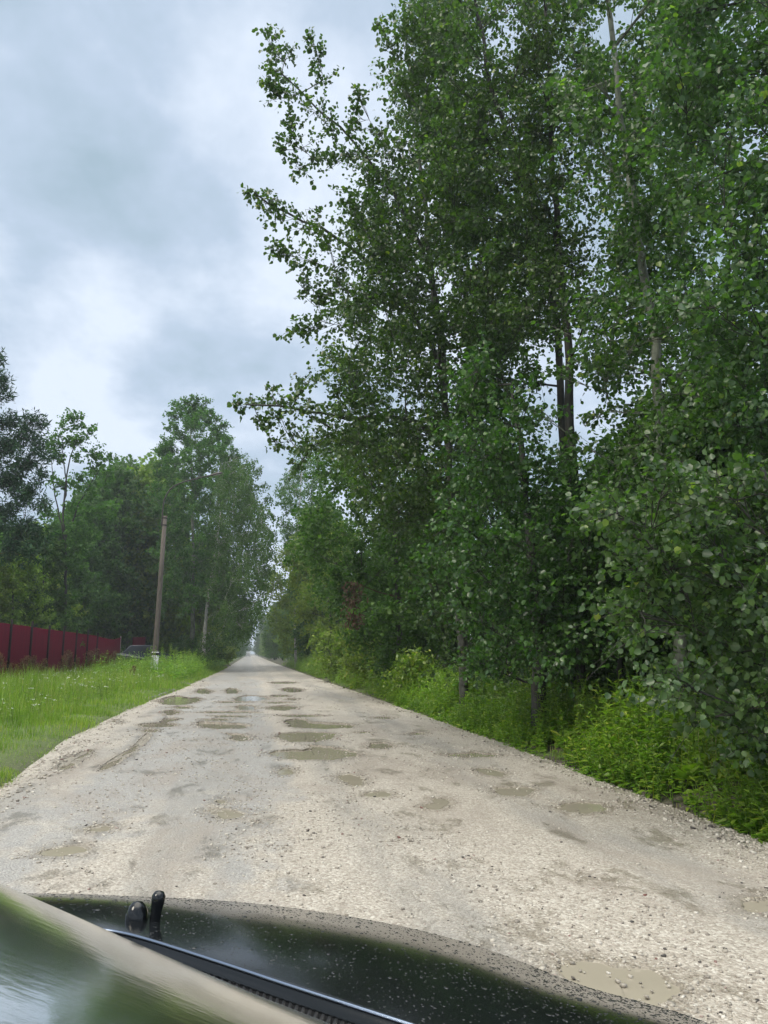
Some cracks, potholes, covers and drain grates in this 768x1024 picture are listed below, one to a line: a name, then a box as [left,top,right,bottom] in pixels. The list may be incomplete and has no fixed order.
pothole [422,798,450,810]
pothole [494,786,536,796]
pothole [476,768,507,777]
pothole [555,959,686,1006]
pothole [283,718,355,729]
pothole [740,895,768,913]
pothole [337,774,366,786]
pothole [158,695,203,705]
pothole [196,721,251,729]
pothole [553,802,608,814]
pothole [268,745,361,760]
pothole [138,718,179,728]
